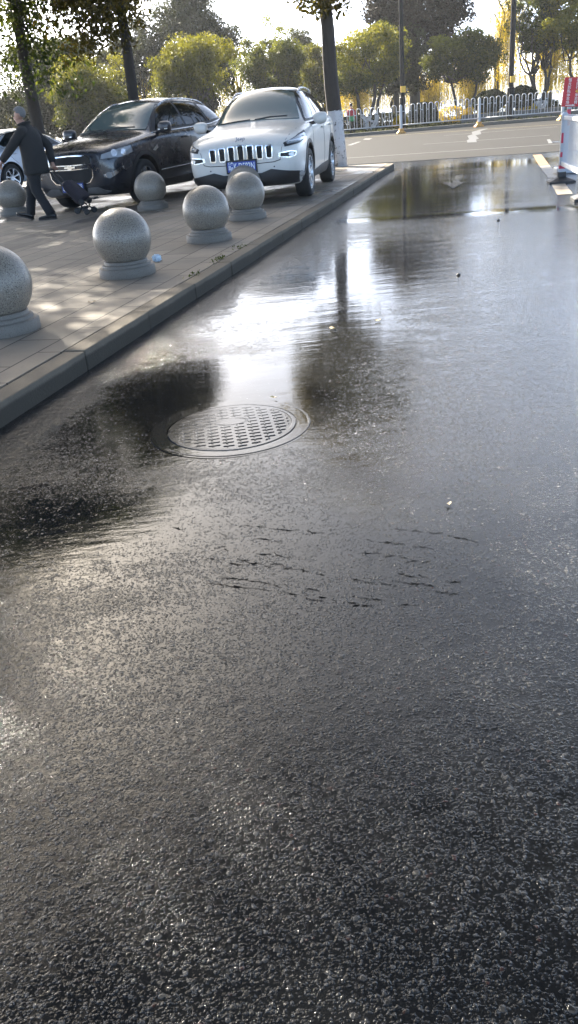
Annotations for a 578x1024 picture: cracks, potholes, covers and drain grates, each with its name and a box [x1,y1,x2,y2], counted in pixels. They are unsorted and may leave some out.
manhole cover [150,400,314,459]
